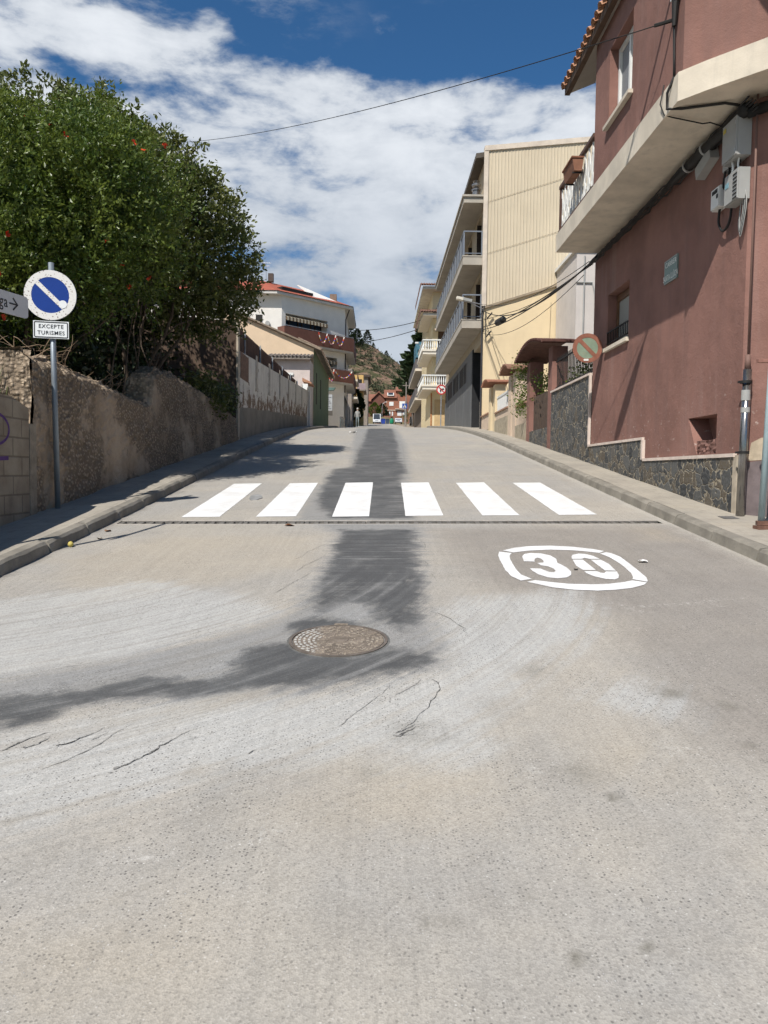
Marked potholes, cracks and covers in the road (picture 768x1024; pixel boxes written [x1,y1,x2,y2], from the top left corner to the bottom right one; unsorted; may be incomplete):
manhole cover [287,623,390,658]
crack [4,724,131,769]
crack [108,729,193,773]
crack [341,678,441,736]
